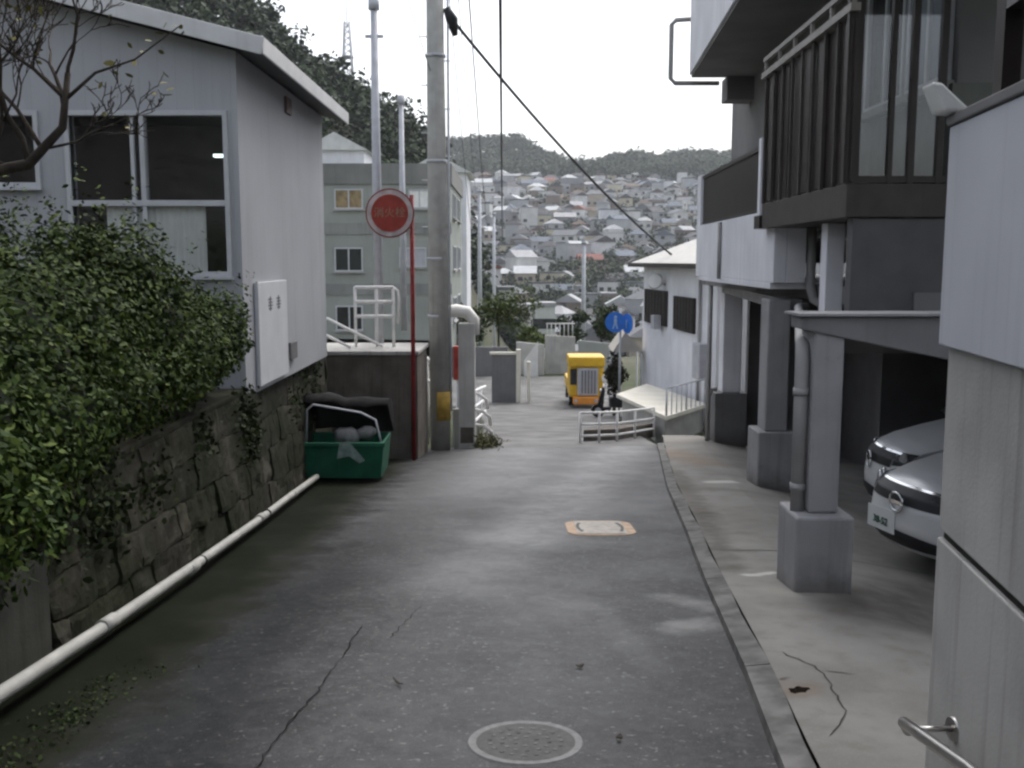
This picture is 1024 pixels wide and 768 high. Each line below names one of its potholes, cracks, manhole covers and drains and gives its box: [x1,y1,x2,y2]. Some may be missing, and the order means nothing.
crack [783,652,851,735]
manhole cover [565,521,636,536]
manhole cover [467,721,584,766]
